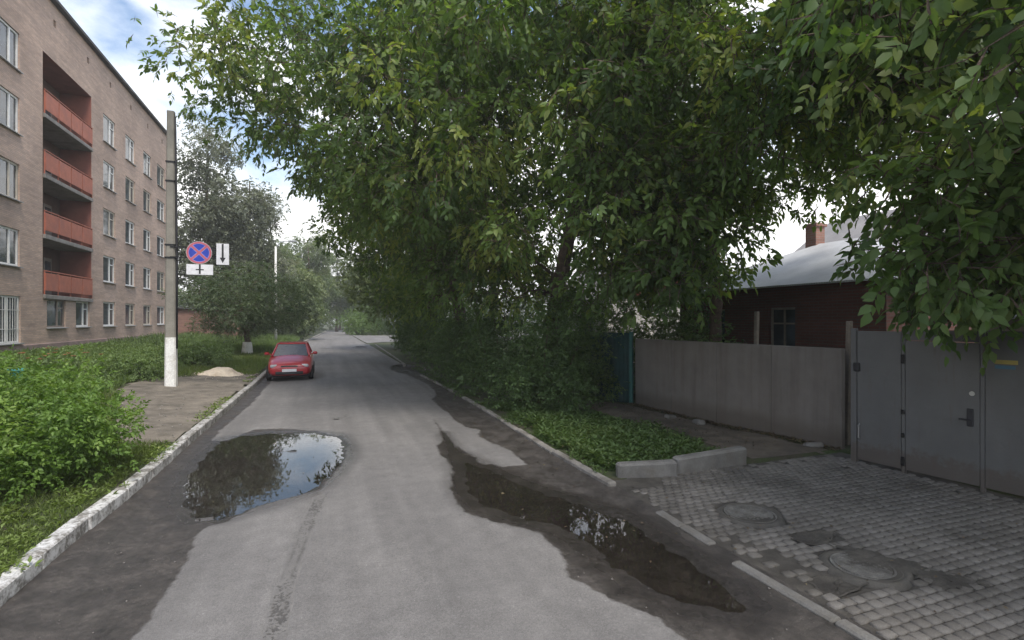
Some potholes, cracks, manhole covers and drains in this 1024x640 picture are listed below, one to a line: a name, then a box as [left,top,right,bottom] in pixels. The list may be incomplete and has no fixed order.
crack [260,493,328,640]
manhole cover [716,502,786,529]
manhole cover [818,550,915,591]
